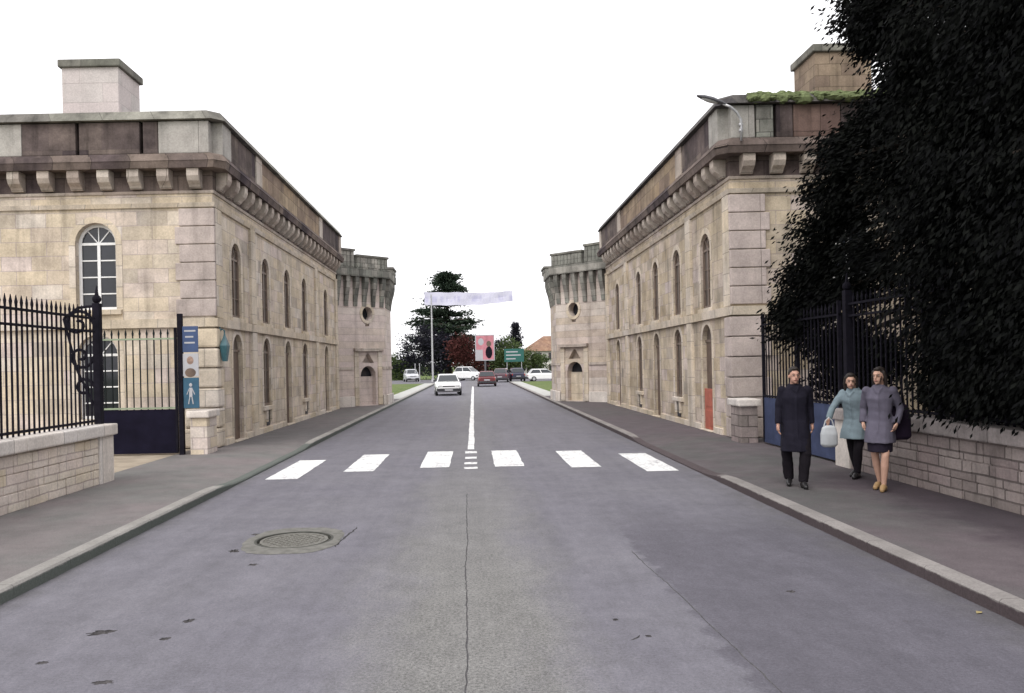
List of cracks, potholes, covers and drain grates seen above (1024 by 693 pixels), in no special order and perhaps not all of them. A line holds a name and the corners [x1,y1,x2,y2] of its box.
crack [632,551,783,693]
manhole cover [241,527,344,555]
